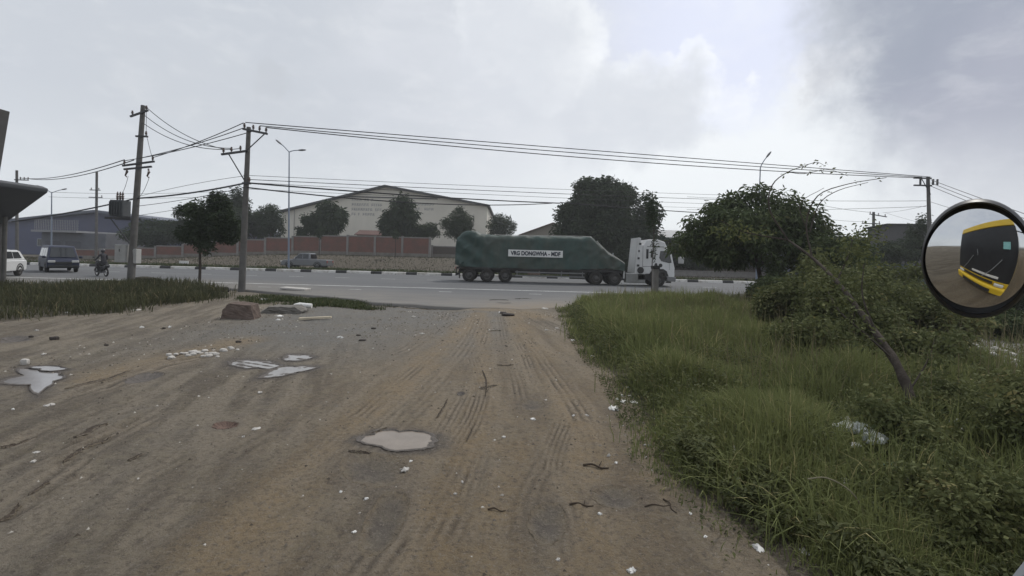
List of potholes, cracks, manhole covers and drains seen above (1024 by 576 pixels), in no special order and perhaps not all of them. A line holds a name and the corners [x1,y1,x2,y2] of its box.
pothole [257,365,319,379]
pothole [212,421,239,429]
pothole [0,367,66,395]
pothole [356,429,439,452]
pothole [282,353,316,361]
pothole [227,359,283,369]
